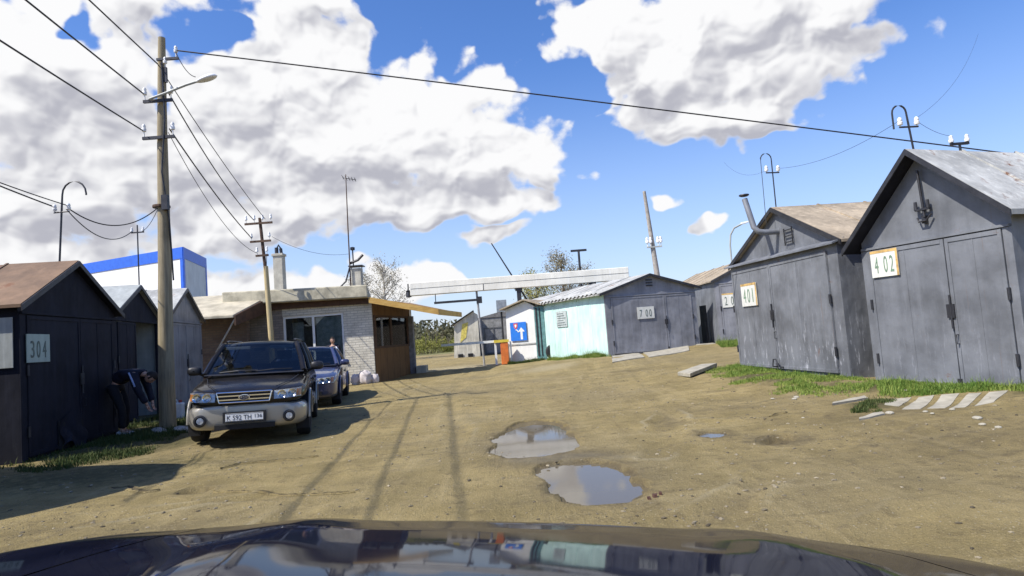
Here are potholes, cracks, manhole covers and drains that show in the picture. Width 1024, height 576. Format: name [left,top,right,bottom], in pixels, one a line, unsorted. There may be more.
pothole [472,417,599,464]
pothole [514,454,676,515]
